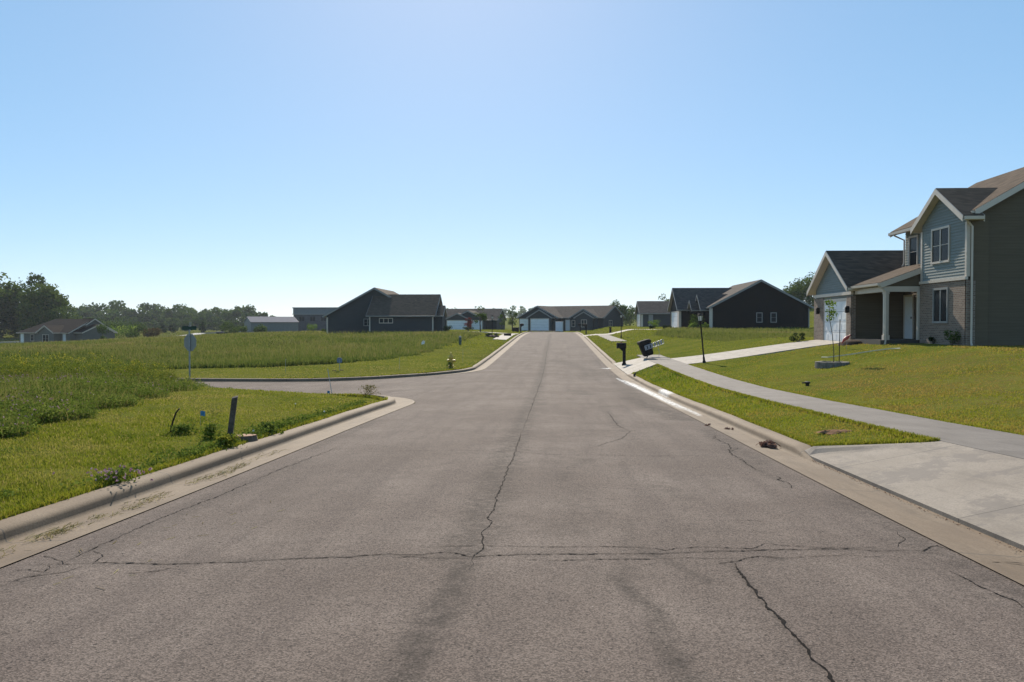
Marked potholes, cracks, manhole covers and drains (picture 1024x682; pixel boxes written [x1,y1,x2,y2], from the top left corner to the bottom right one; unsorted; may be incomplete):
crack [11,343,952,682]
